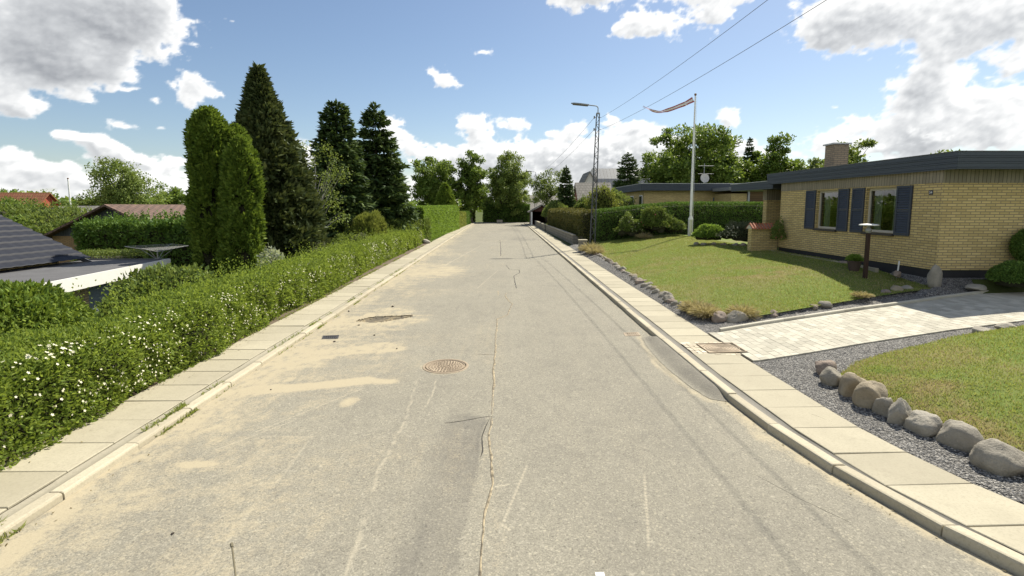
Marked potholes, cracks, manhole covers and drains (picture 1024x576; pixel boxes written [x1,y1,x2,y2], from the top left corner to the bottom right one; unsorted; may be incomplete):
manhole cover [422,359,469,374]
crack [449,243,520,576]
utility cover [696,342,747,353]
